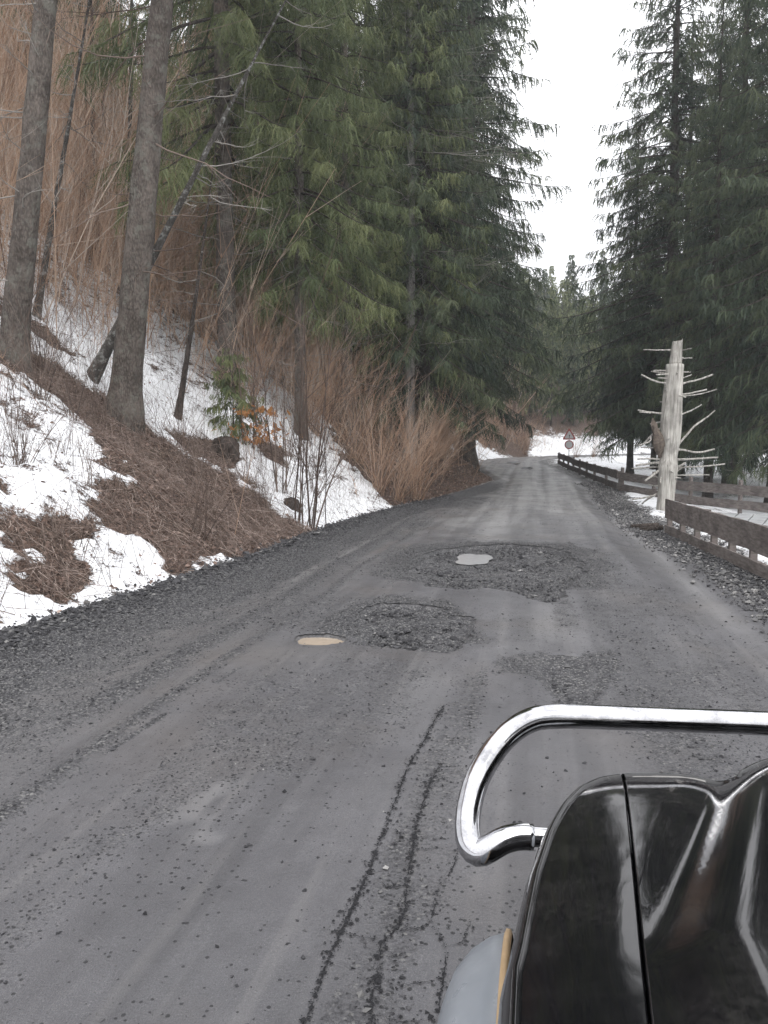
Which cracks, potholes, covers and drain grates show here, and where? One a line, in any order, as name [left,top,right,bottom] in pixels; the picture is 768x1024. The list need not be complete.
pothole [352,602,476,653]
pothole [294,633,357,645]
crack [299,705,475,1024]
pothole [405,544,587,603]
